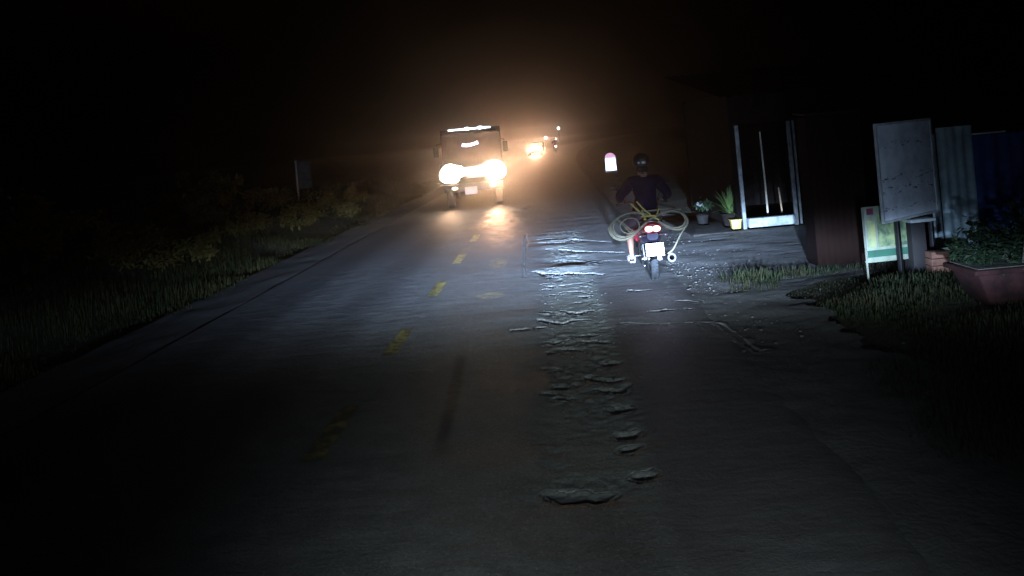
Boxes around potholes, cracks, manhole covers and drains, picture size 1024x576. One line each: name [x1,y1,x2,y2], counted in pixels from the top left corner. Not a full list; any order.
pothole [611,429,646,442]
crack [531,234,778,355]
pothole [615,444,645,455]
pothole [603,404,640,415]
pothole [627,468,661,483]
pothole [541,489,622,508]
